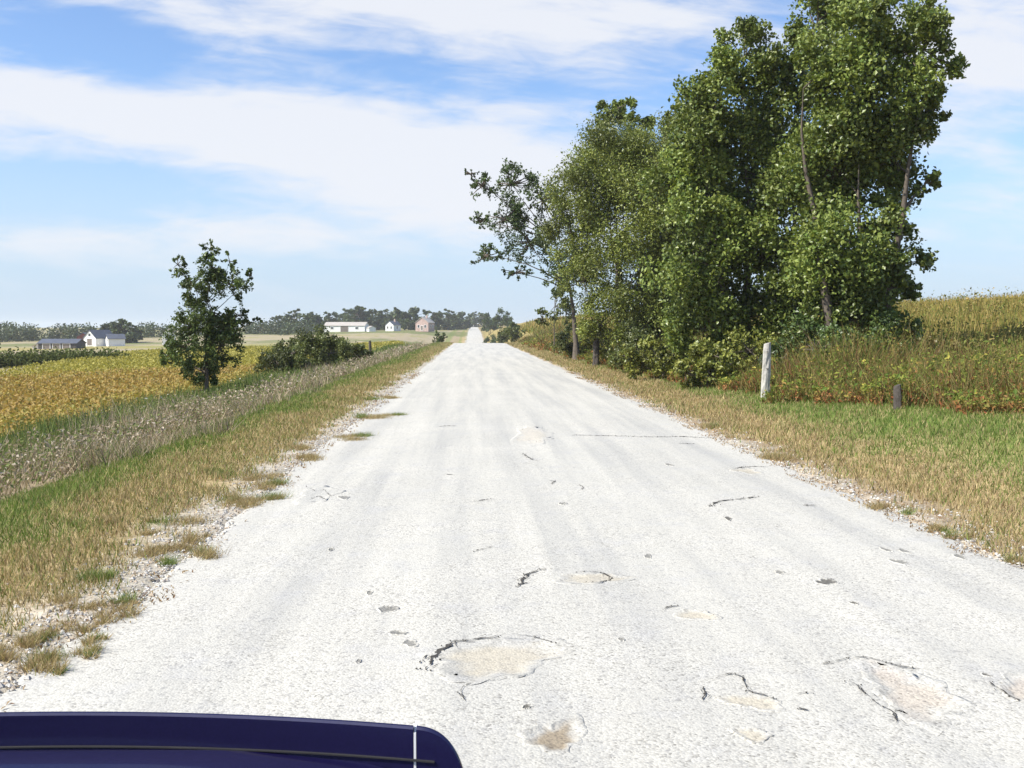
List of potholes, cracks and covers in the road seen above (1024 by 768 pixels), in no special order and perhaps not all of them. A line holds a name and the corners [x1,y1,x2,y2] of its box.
pothole [997,669,1024,702]
pothole [515,713,588,755]
pothole [548,573,644,585]
pothole [725,725,774,745]
pothole [672,608,723,621]
crack [516,568,551,587]
pothole [510,425,554,447]
pothole [852,656,977,736]
pothole [415,637,586,687]
pothole [713,693,787,713]
